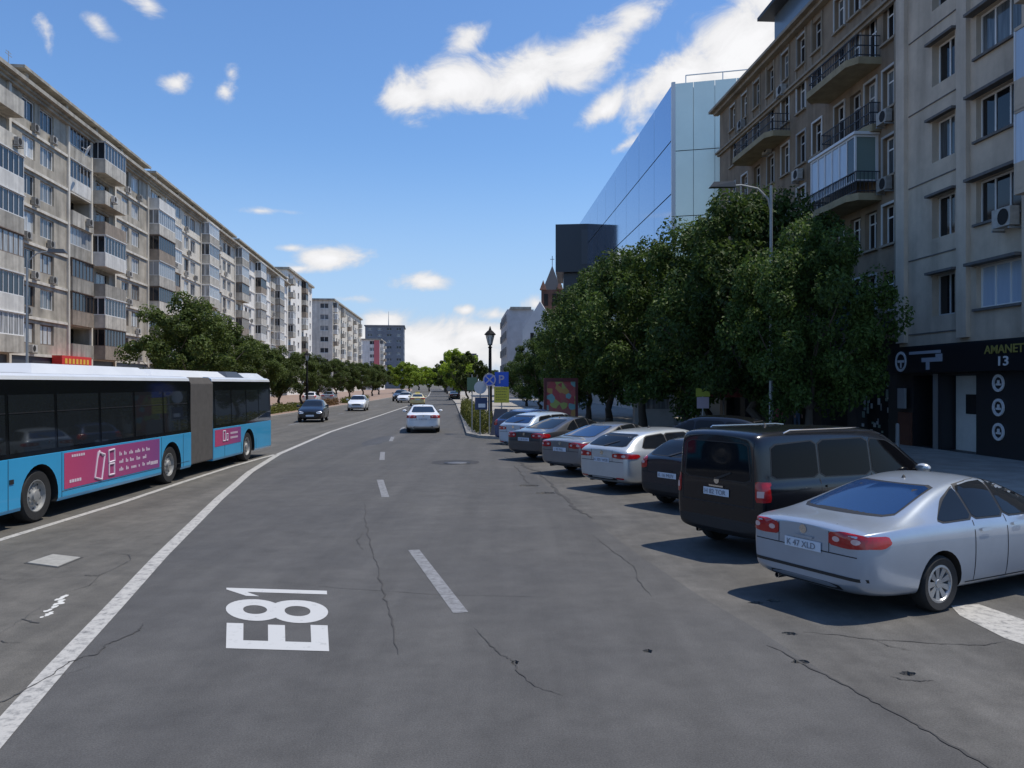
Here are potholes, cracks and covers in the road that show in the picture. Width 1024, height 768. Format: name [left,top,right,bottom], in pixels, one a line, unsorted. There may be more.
crack [803,631,1003,651]
manhole cover [24,554,84,568]
crack [0,623,143,702]
crack [356,506,398,650]
crack [0,552,131,642]
crack [475,628,562,695]
